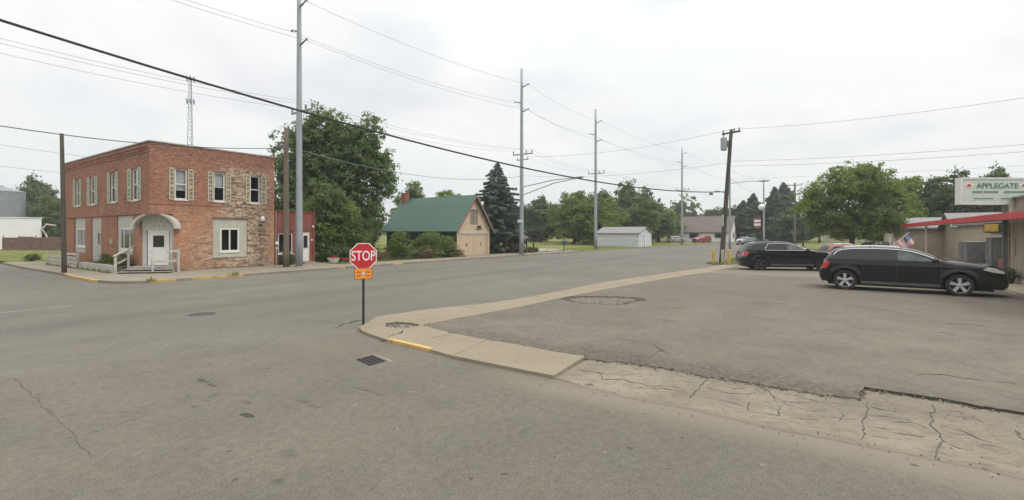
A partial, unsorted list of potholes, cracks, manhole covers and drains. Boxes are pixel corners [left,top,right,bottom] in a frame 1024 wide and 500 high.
crack [917,374,1016,385]
drain grate [356,354,394,366]
crack [929,405,1001,459]
crack [577,369,859,431]
crack [14,378,145,458]
